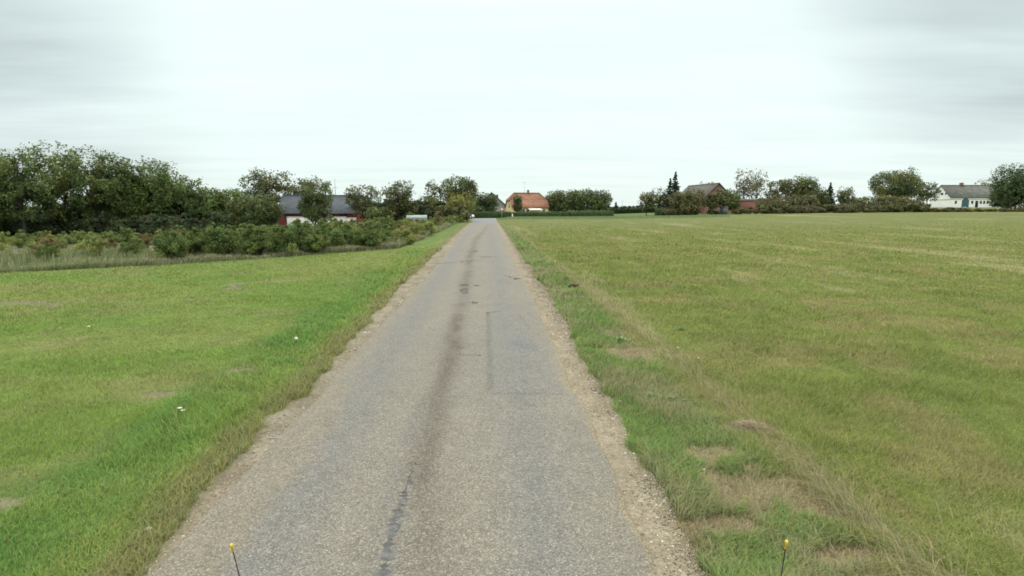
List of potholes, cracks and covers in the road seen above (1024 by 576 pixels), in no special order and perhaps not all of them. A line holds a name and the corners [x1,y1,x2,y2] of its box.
crack [369,465,424,576]
